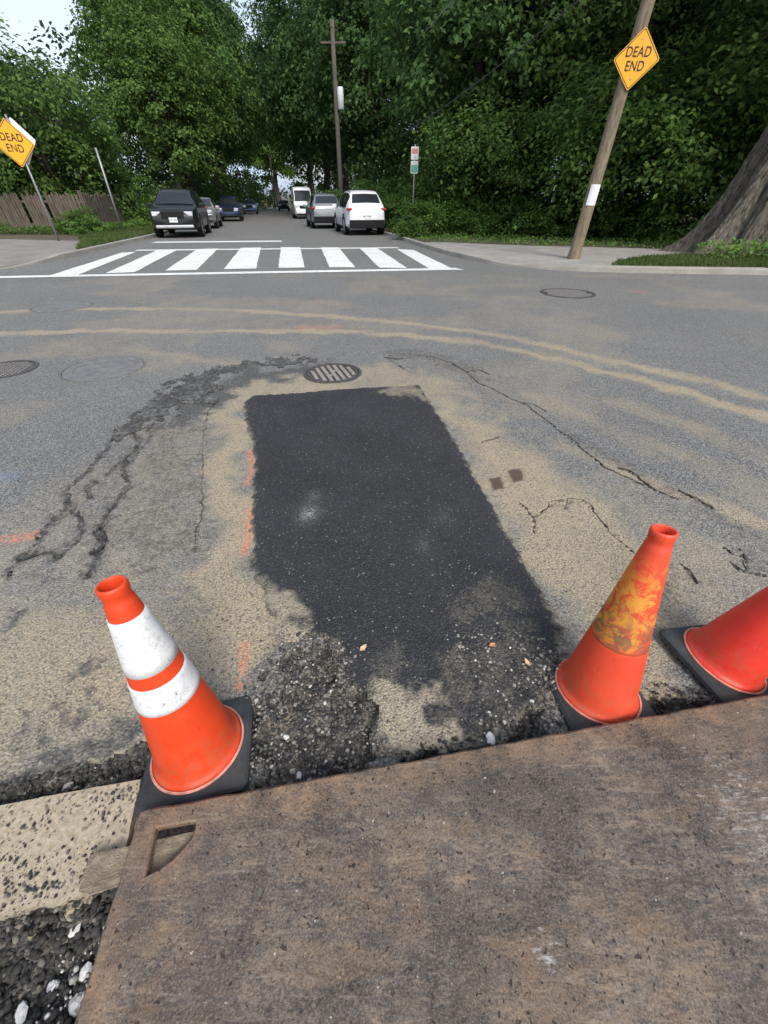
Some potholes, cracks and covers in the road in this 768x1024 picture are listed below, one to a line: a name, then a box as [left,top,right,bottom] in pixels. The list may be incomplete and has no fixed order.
manhole cover [540,288,596,298]
manhole cover [0,360,39,379]
manhole cover [59,356,146,382]
crack [680,547,767,584]
crack [384,354,714,509]
crack [1,353,318,579]
crack [519,498,635,553]
